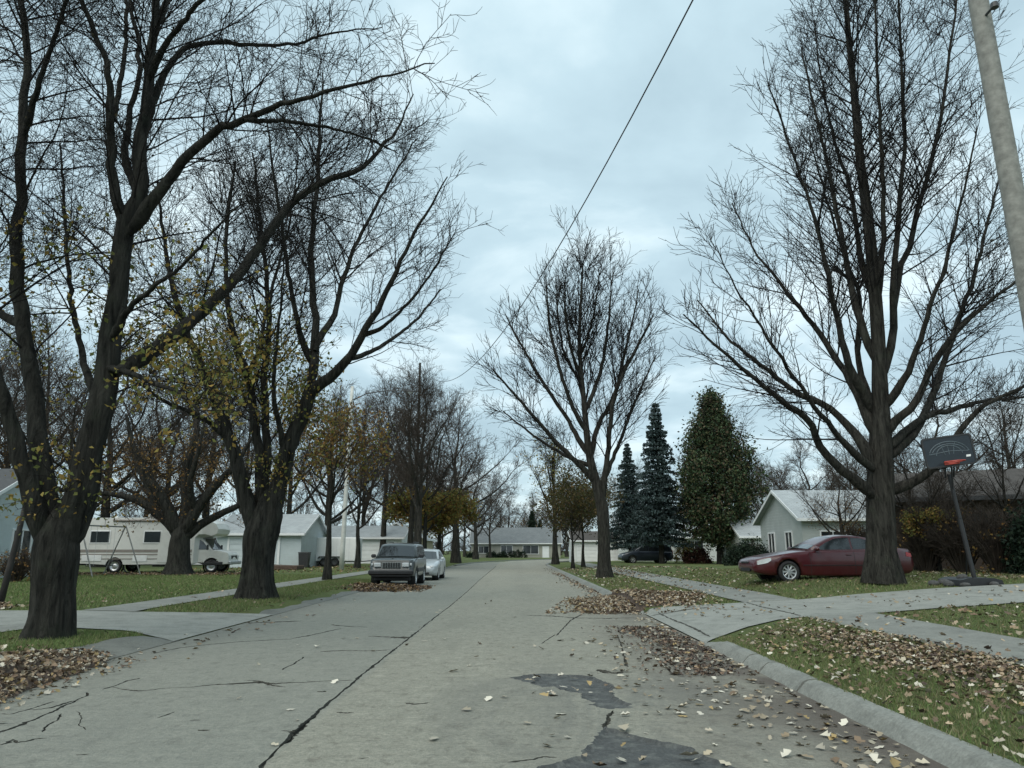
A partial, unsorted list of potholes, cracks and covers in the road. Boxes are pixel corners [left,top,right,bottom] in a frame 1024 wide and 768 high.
crack [524,615,628,674]
crack [0,621,411,745]
